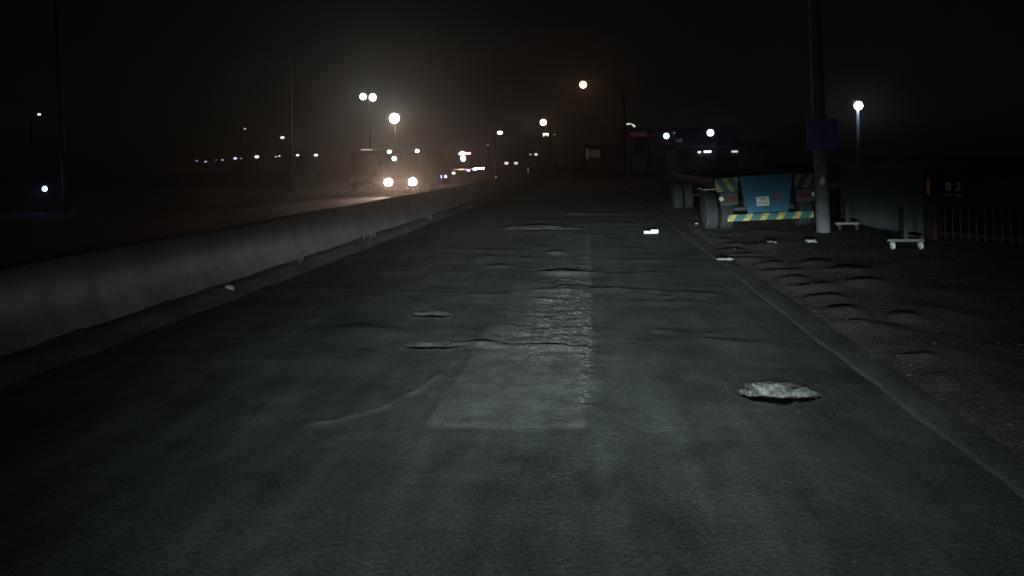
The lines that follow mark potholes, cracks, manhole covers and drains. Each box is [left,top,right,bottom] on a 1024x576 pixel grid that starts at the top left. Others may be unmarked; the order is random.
pothole [407,311,456,319]
crack [644,327,725,338]
pothole [729,380,834,408]
pothole [397,341,479,350]
